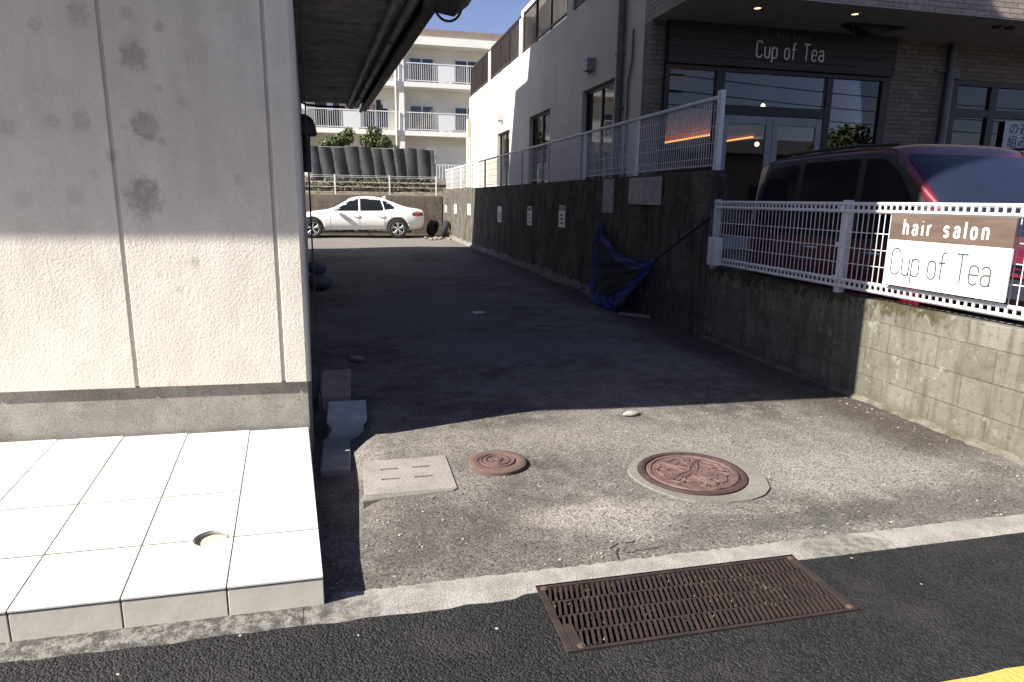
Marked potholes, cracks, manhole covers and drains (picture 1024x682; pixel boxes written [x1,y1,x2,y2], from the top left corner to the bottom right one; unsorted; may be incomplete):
manhole cover [468,450,527,476]
manhole cover [627,449,770,504]
utility cover [363,456,458,509]
drain grate [536,555,859,654]
crack [609,540,660,560]
